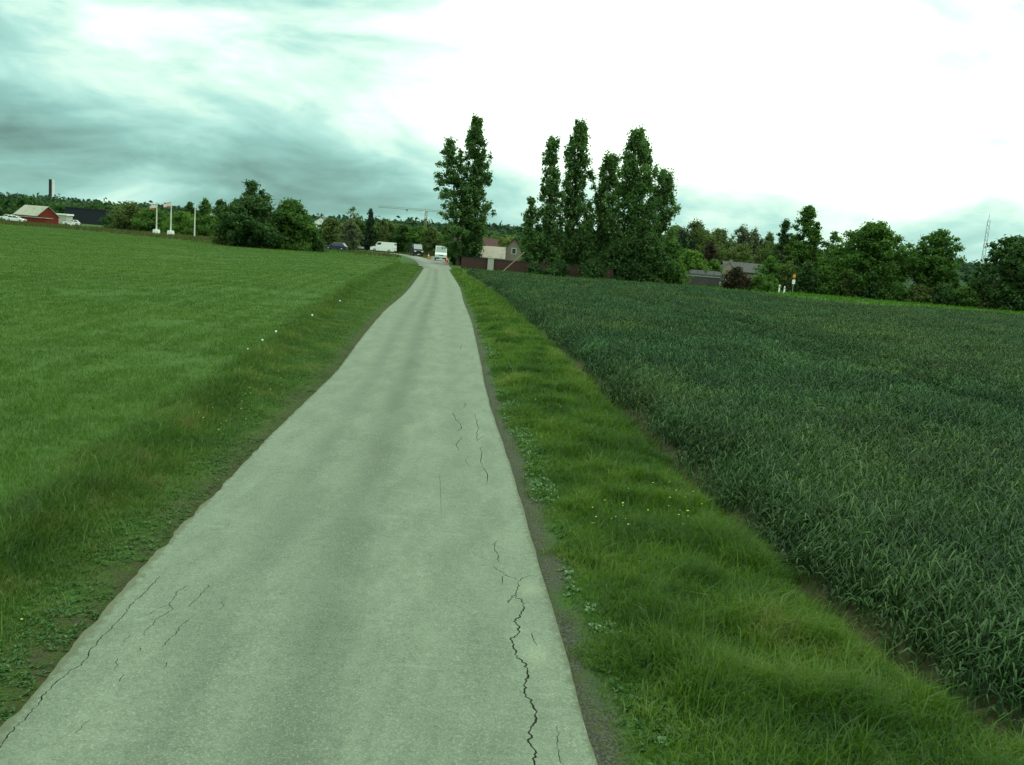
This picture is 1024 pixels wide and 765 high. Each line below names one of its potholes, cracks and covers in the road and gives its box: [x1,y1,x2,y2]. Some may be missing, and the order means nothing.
crack [453,404,488,485]
crack [0,577,223,748]
crack [493,542,538,765]
